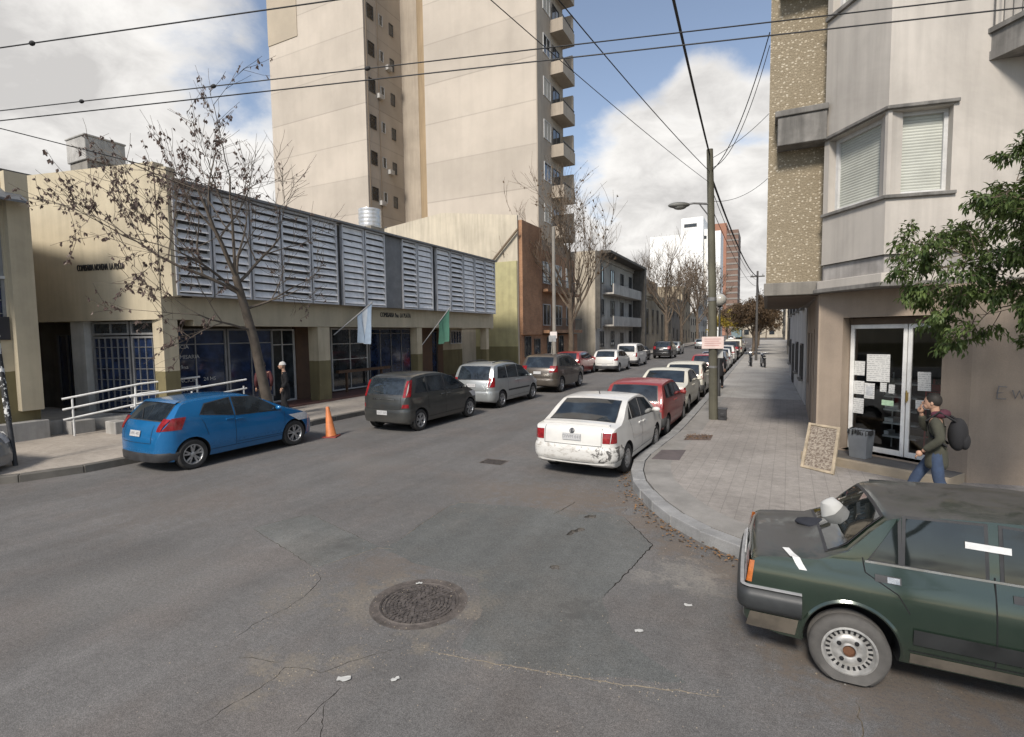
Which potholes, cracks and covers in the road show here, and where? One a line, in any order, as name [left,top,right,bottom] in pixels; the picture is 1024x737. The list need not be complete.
crack [605,518,653,594]
crack [197,648,400,737]
manhole cover [369,579,468,630]
